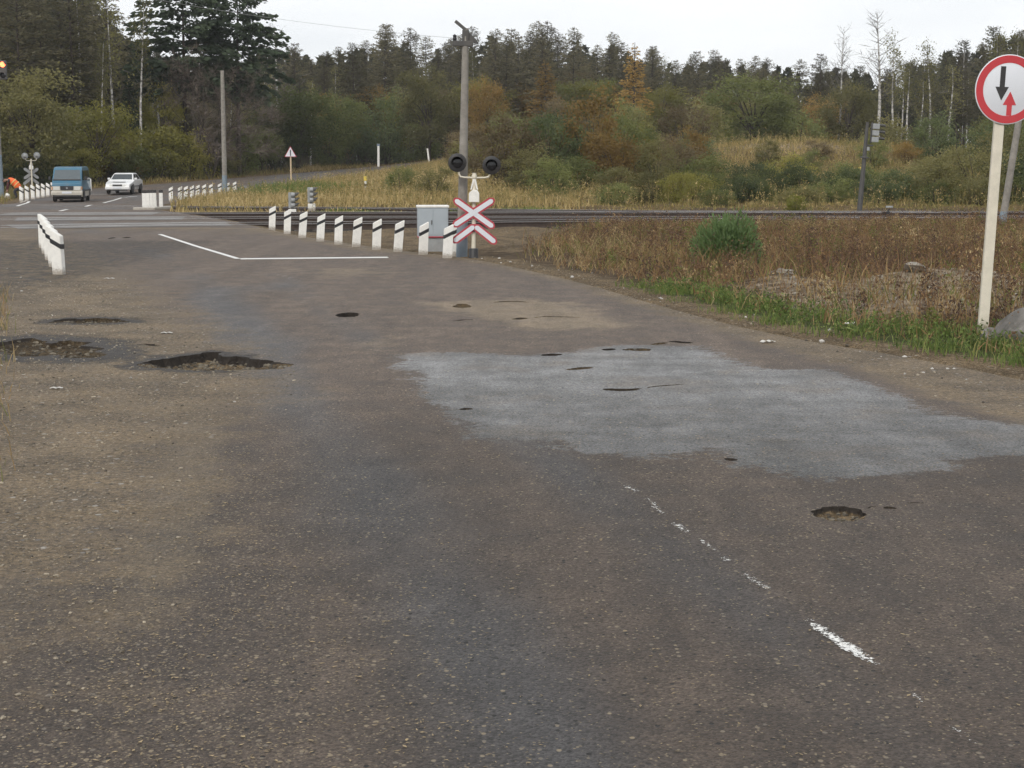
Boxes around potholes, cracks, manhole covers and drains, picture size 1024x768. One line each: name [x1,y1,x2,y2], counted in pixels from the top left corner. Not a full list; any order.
pothole [811,506,867,522]
pothole [137,352,294,371]
pothole [0,338,106,358]
